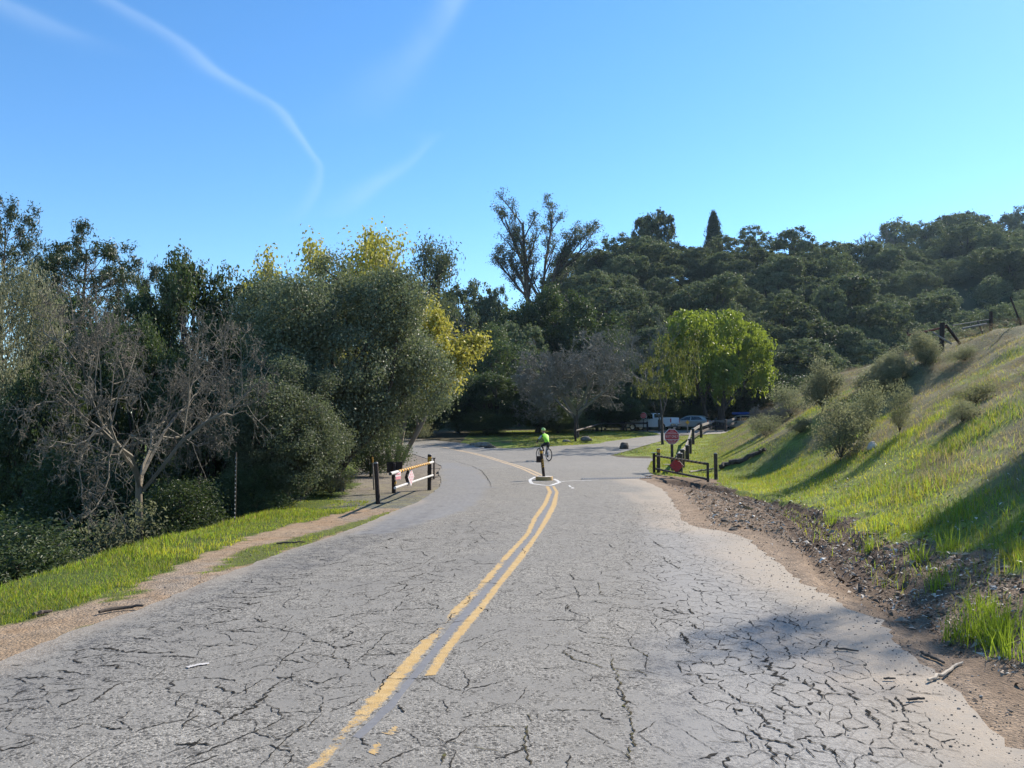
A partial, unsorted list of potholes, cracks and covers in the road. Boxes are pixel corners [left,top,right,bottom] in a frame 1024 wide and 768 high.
crack [0,514,504,768]
crack [360,503,960,768]
